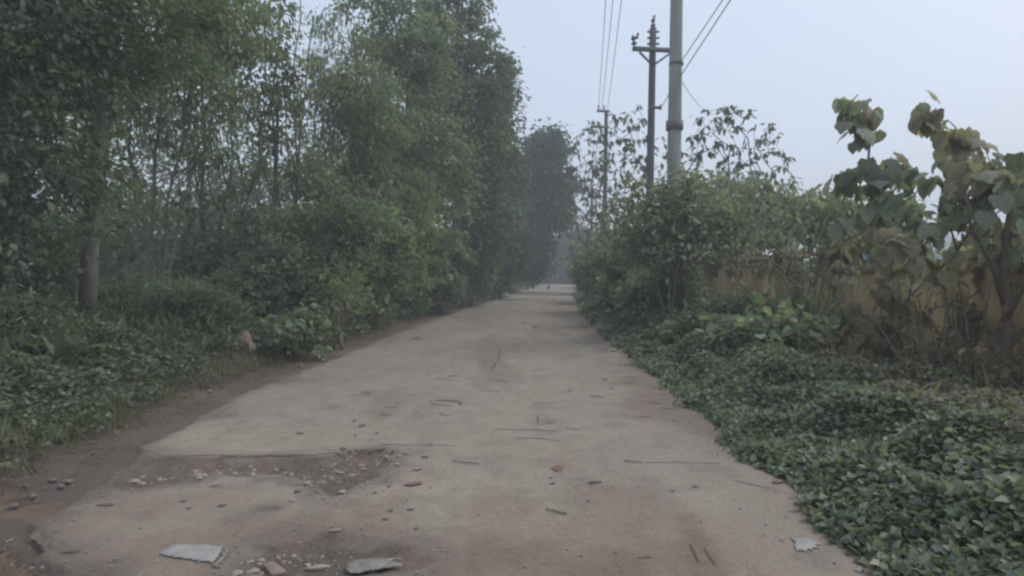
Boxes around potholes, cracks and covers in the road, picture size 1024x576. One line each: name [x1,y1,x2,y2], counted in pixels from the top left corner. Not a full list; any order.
pothole [112,449,401,498]
